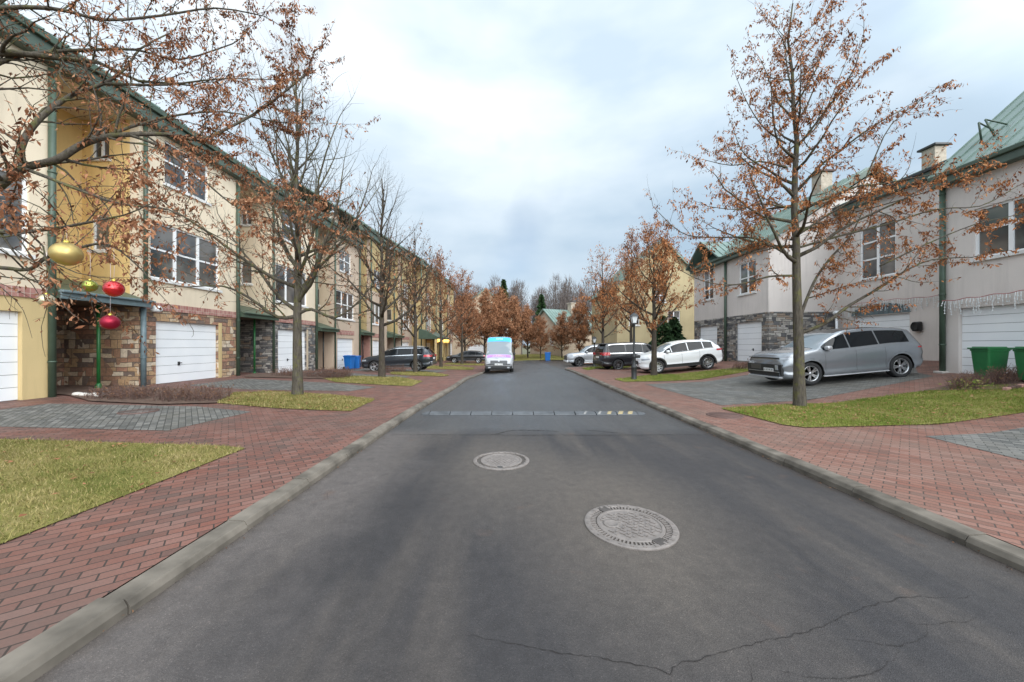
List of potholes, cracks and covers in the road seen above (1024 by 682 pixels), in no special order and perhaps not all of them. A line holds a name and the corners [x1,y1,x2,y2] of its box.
manhole cover [473,451,529,470]
manhole cover [585,504,679,551]
crack [473,595,970,675]
